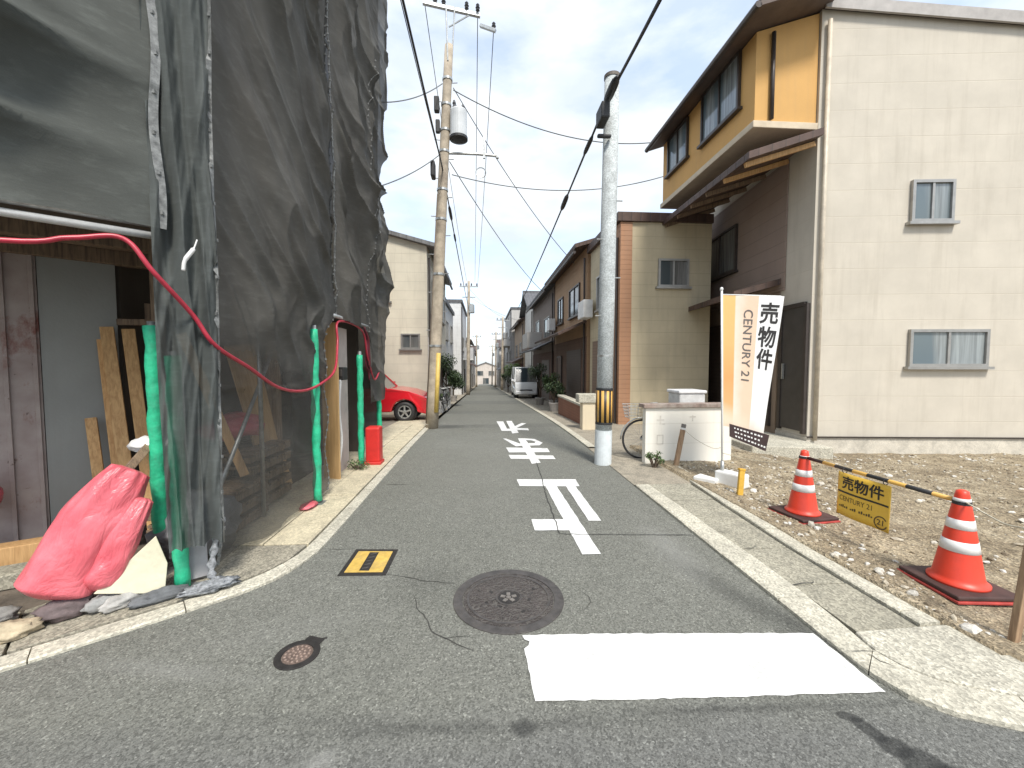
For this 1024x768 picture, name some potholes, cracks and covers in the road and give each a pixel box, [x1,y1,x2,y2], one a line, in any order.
crack [389,574,474,651]
utility cover [337,549,398,576]
manhole cover [453,569,564,635]
manhole cover [273,635,327,671]
